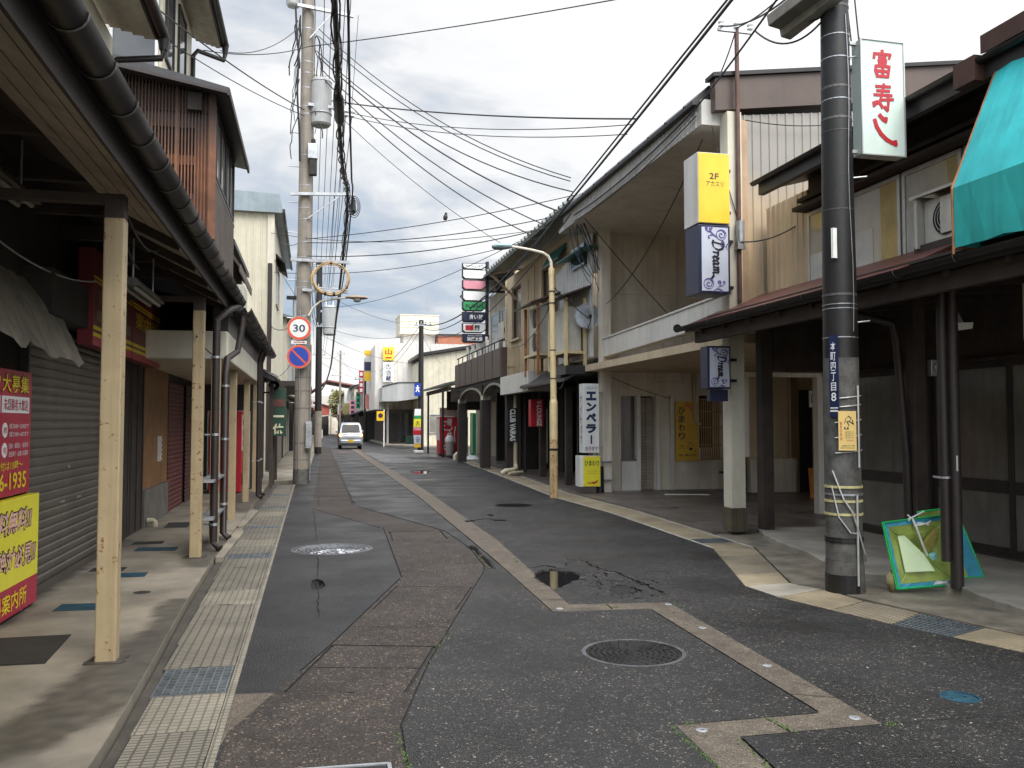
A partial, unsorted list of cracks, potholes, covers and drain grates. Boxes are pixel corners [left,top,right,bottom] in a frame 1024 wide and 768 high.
pothole [534,569,585,589]
manhole cover [290,543,373,555]
manhole cover [939,691,982,703]
drain grate [894,613,982,637]
crack [532,558,664,599]
drain grate [150,666,235,701]
manhole cover [582,639,686,667]
pothole [311,579,325,590]
